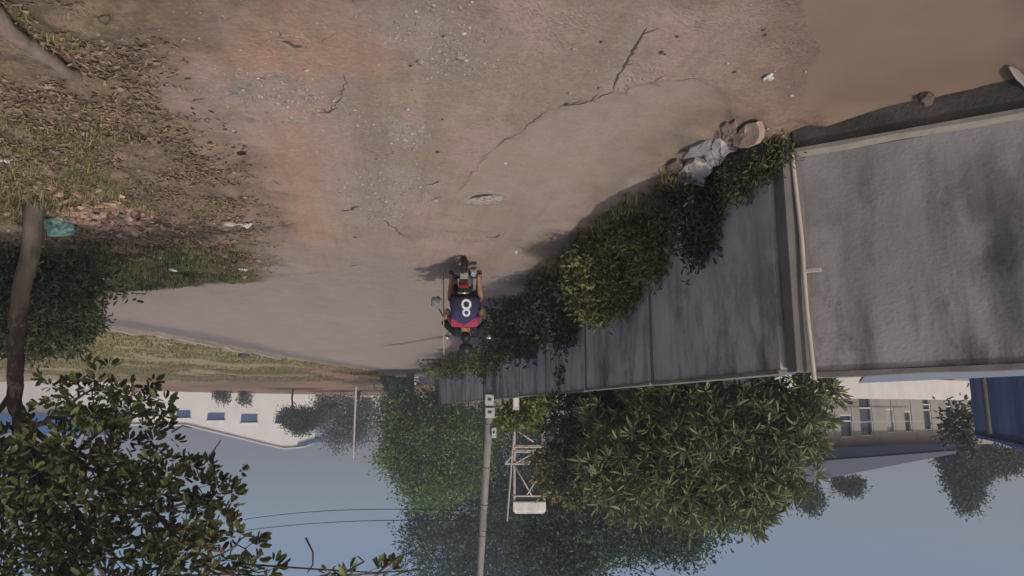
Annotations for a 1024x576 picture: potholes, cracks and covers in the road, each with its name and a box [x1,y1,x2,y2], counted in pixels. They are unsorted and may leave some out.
crack [463,28,664,186]
pothole [457,191,512,206]
crack [322,77,348,114]
